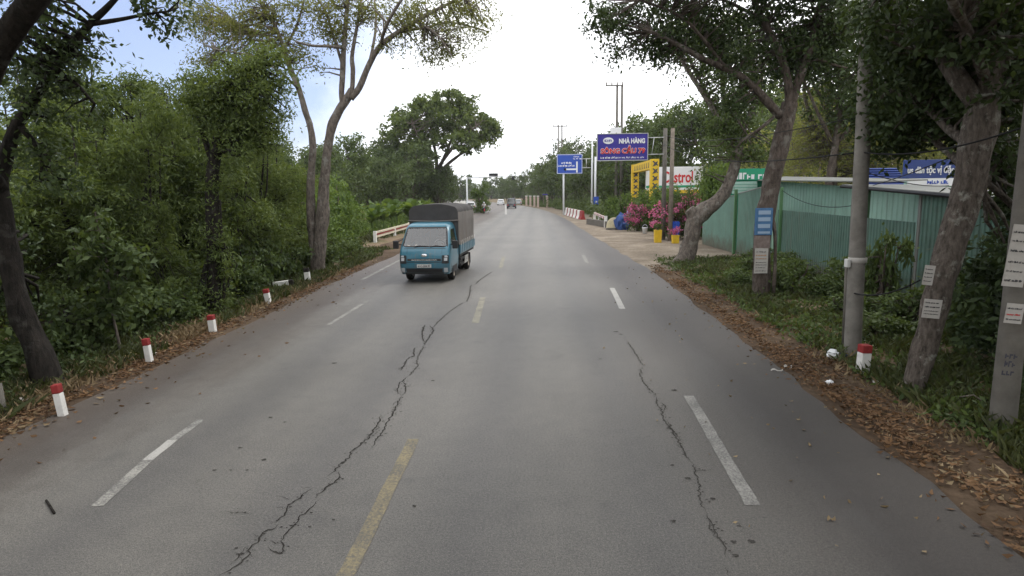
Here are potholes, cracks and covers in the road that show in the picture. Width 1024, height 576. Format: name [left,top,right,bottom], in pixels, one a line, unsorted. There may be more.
crack [220,272,492,575]
crack [626,342,750,573]
